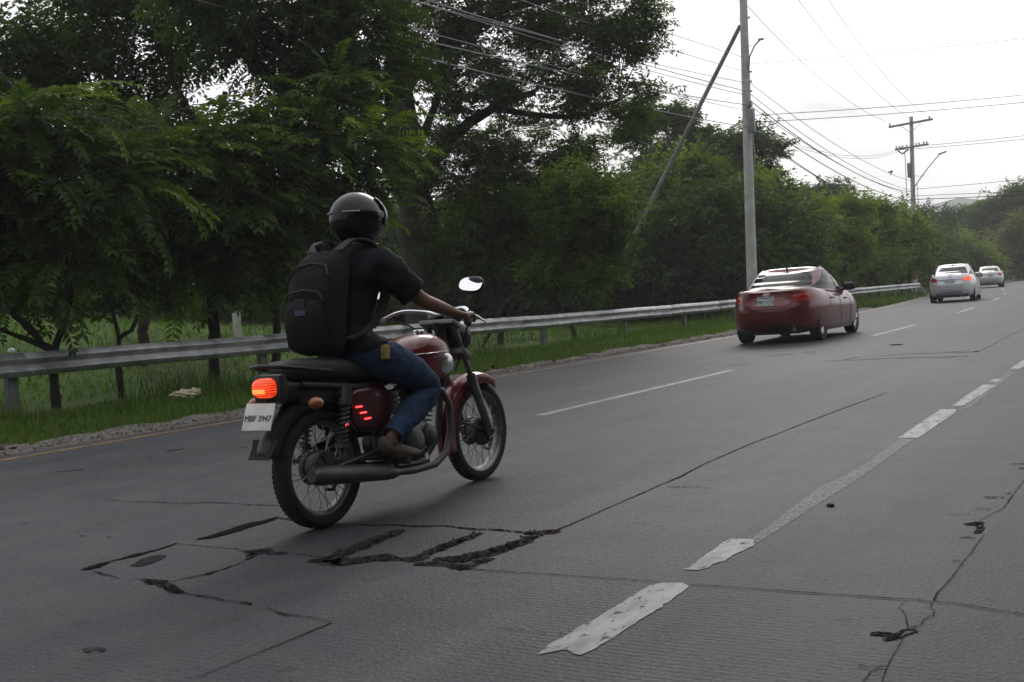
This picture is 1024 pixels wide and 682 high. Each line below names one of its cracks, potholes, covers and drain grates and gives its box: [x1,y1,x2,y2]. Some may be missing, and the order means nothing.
crack [859,463,1024,681]
crack [834,328,1024,361]
crack [106,499,536,533]
crack [179,591,332,677]
